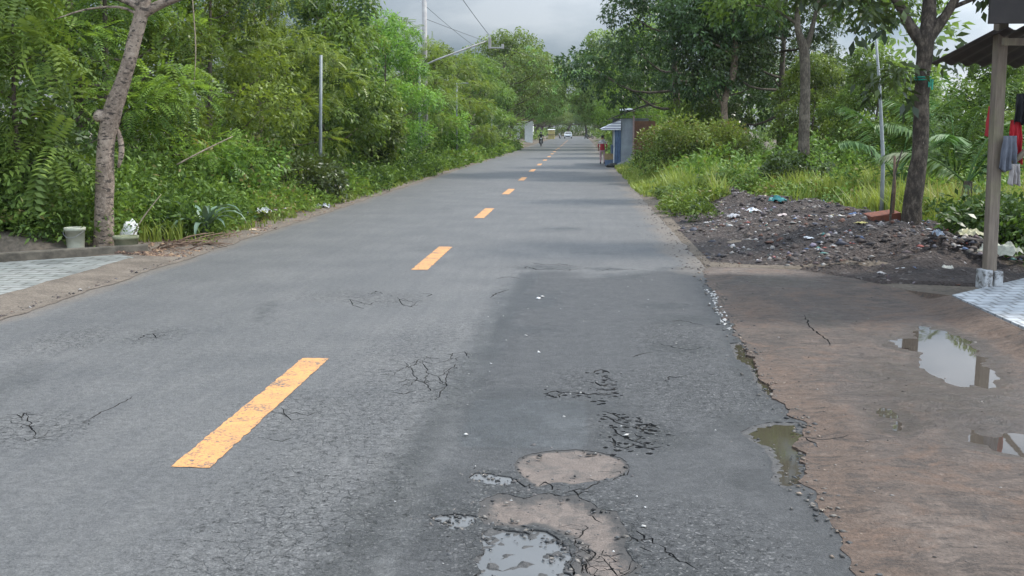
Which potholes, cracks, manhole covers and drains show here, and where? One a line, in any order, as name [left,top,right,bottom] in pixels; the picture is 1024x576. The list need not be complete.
pothole [431,513,476,530]
pothole [478,493,642,576]
pothole [469,473,513,486]
pothole [514,449,629,488]
crack [0,412,54,441]
crack [347,291,432,308]
crack [512,369,671,496]
pothole [741,422,809,489]
crack [384,352,477,400]
crack [558,515,698,576]
